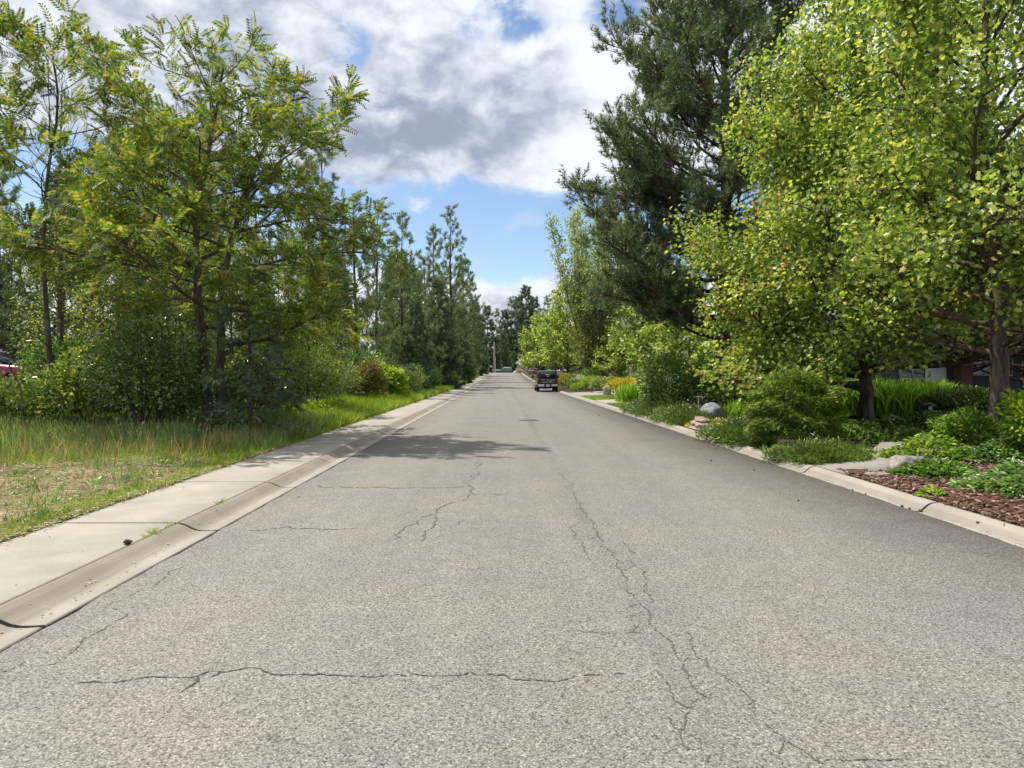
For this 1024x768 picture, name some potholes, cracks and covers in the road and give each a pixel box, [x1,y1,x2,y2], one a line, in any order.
crack [559,468,904,764]
crack [317,464,482,541]
crack [54,567,181,664]
crack [76,667,626,692]
